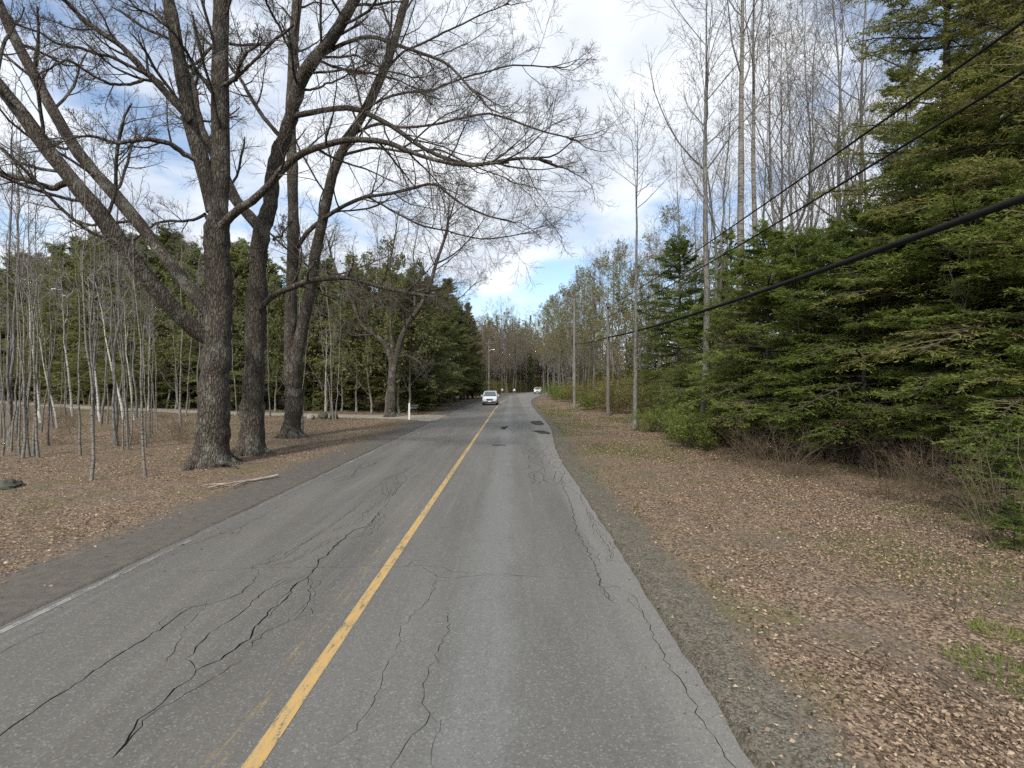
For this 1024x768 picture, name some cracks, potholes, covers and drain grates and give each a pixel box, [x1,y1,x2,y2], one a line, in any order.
crack [526,443,736,768]
crack [0,453,579,757]
